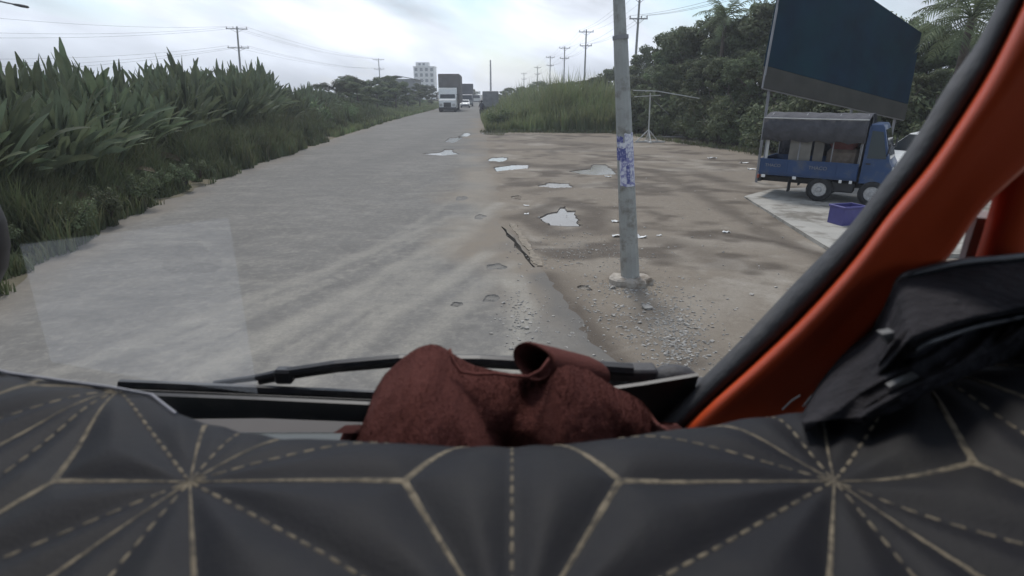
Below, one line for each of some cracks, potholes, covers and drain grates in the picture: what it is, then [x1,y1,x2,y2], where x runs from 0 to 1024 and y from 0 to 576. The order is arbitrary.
pothole [482,294,500,302]
pothole [537,206,581,227]
pothole [569,164,617,175]
